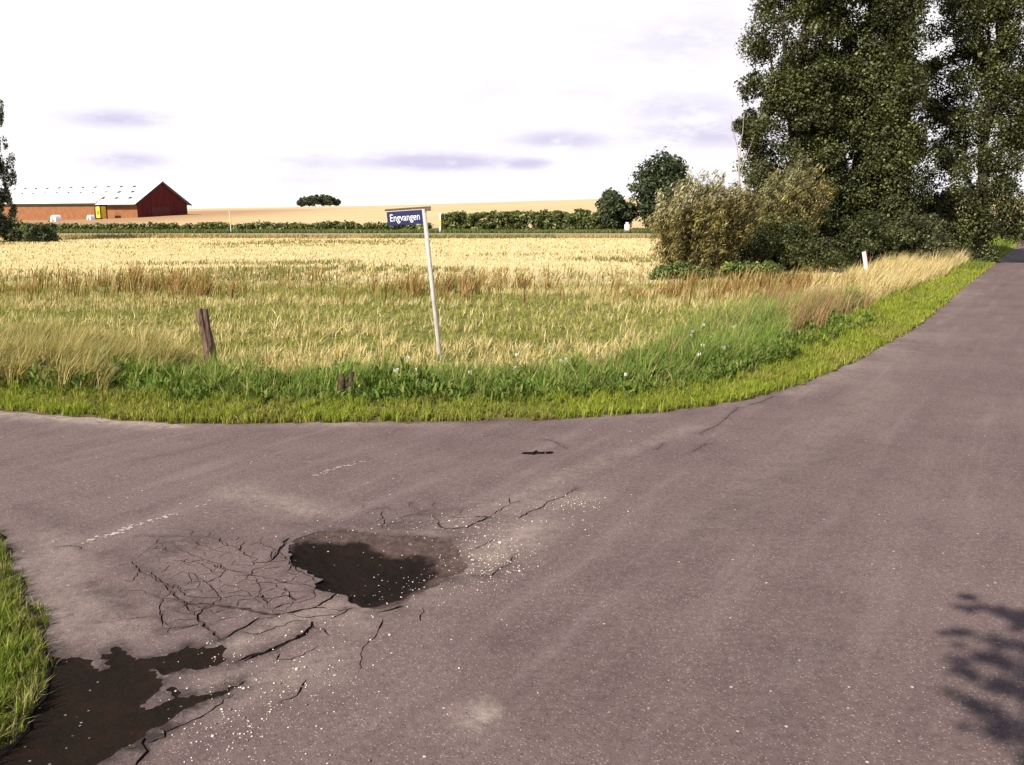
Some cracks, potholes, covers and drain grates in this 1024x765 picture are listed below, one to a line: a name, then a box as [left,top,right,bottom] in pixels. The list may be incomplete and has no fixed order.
crack [95,530,356,661]
crack [358,489,574,576]
pothole [287,530,470,610]
pothole [0,645,245,765]
crack [358,605,425,673]
